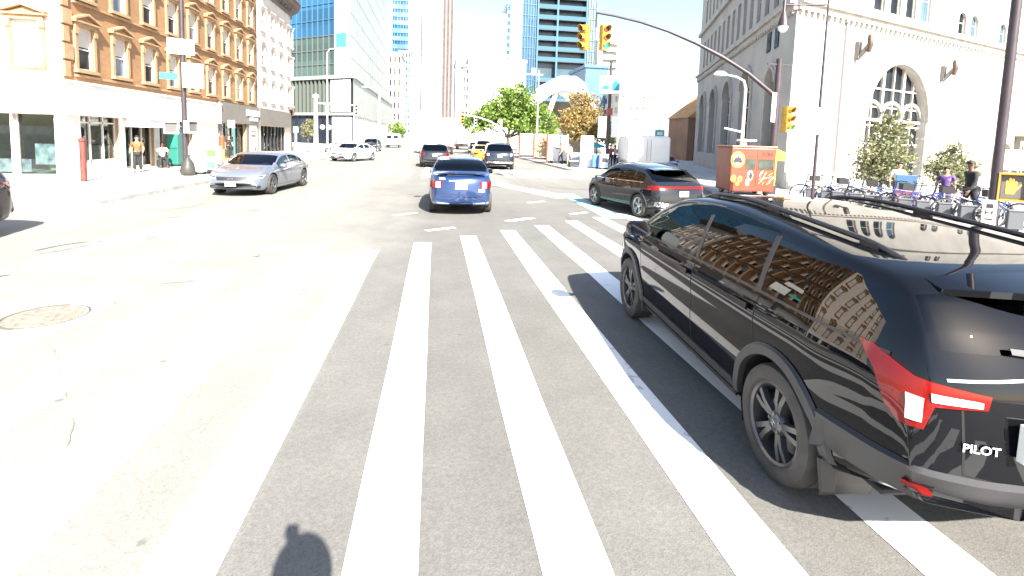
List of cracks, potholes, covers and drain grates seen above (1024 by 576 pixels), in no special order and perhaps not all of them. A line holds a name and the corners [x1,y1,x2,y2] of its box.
manhole cover [0,304,92,330]
crack [44,338,74,447]
